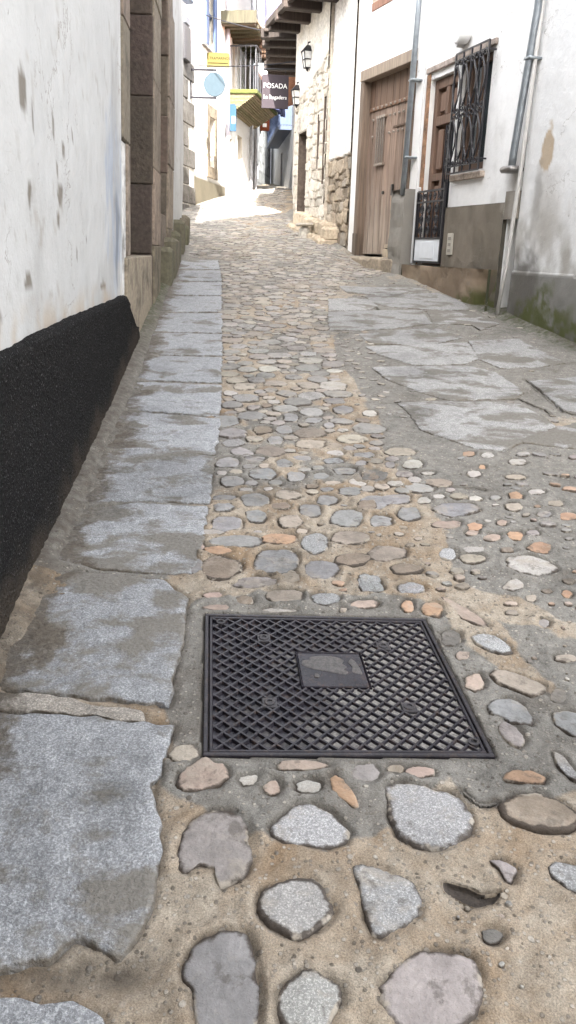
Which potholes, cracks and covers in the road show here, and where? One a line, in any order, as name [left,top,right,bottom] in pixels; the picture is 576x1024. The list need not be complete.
pothole [441,882,500,908]
